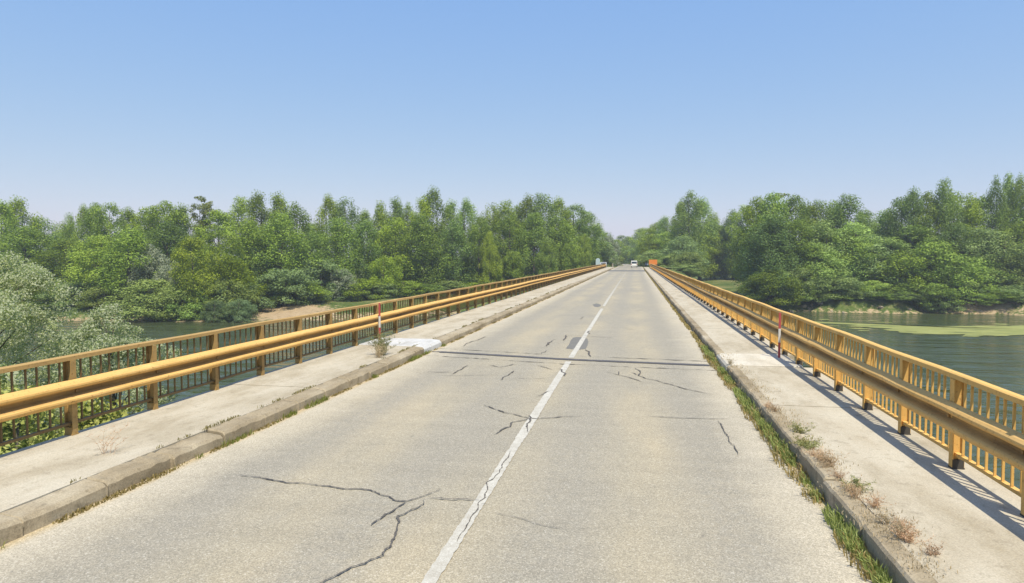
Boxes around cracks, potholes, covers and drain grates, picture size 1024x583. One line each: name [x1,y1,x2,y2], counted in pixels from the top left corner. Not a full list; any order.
crack [489,406,562,433]
crack [237,453,559,583]
